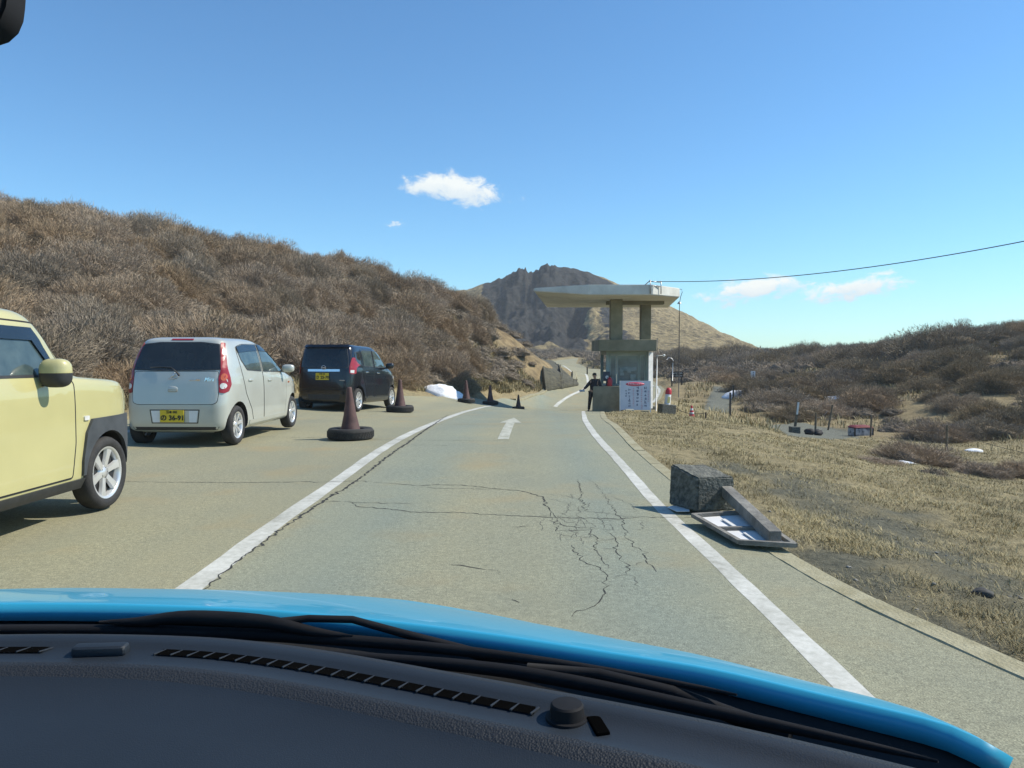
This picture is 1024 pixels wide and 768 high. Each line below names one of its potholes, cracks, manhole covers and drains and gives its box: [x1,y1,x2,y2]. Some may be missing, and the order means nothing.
crack [130,479,691,616]
